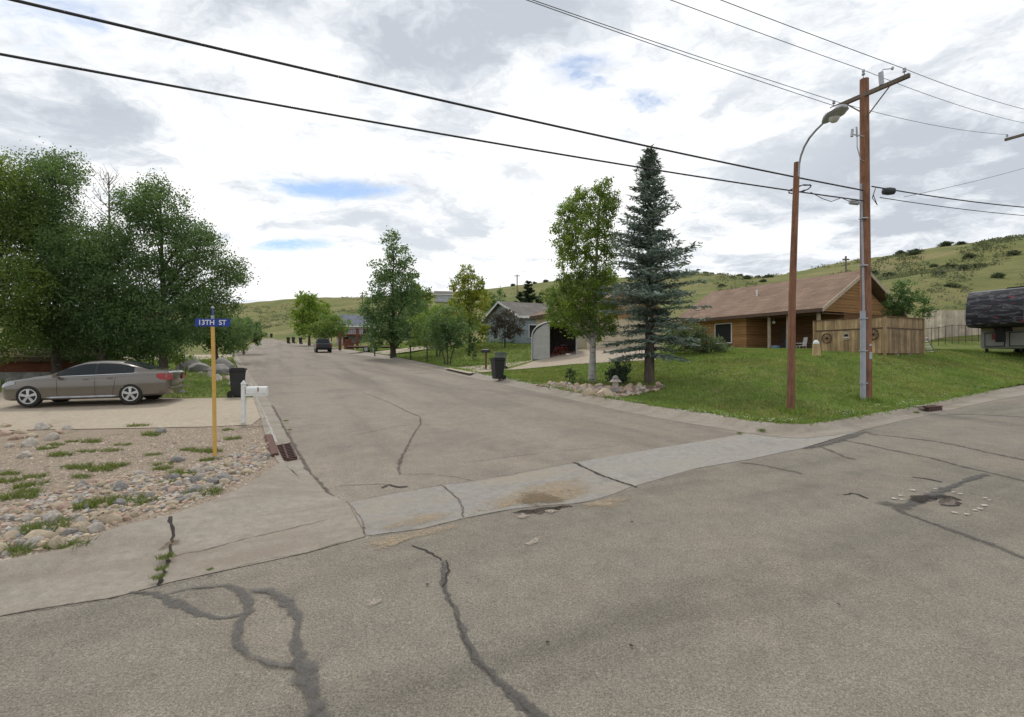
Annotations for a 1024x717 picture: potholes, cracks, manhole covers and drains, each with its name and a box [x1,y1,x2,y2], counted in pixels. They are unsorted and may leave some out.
crack [412,545,531,712]
crack [910,476,961,506]
crack [157,516,175,585]
pothole [938,497,959,505]
drain grate [264,434,297,461]
pothole [513,505,573,515]
